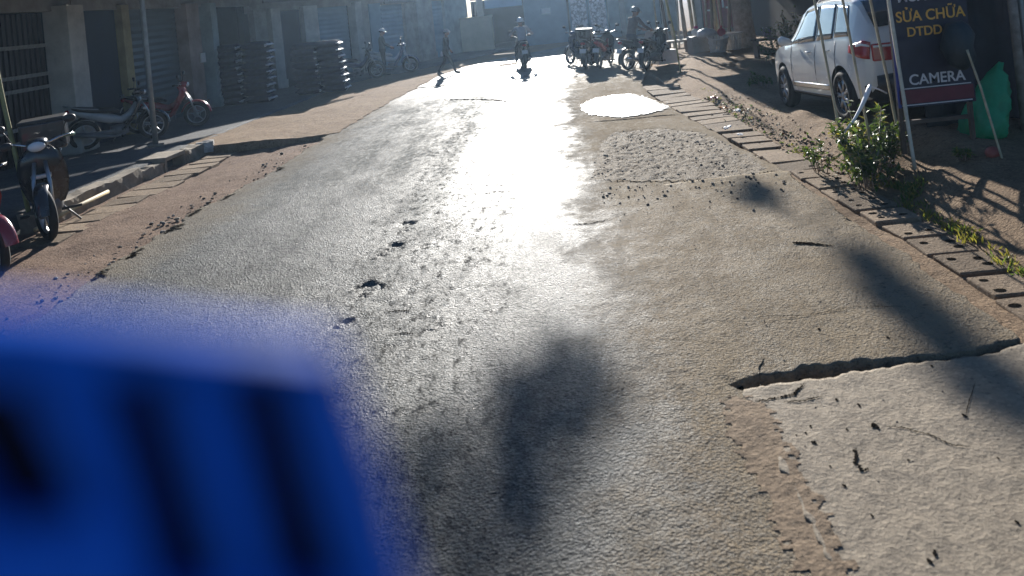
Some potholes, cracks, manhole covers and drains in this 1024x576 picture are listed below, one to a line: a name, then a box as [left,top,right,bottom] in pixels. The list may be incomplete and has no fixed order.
crack [737,378,820,402]
pothole [354,281,383,295]
